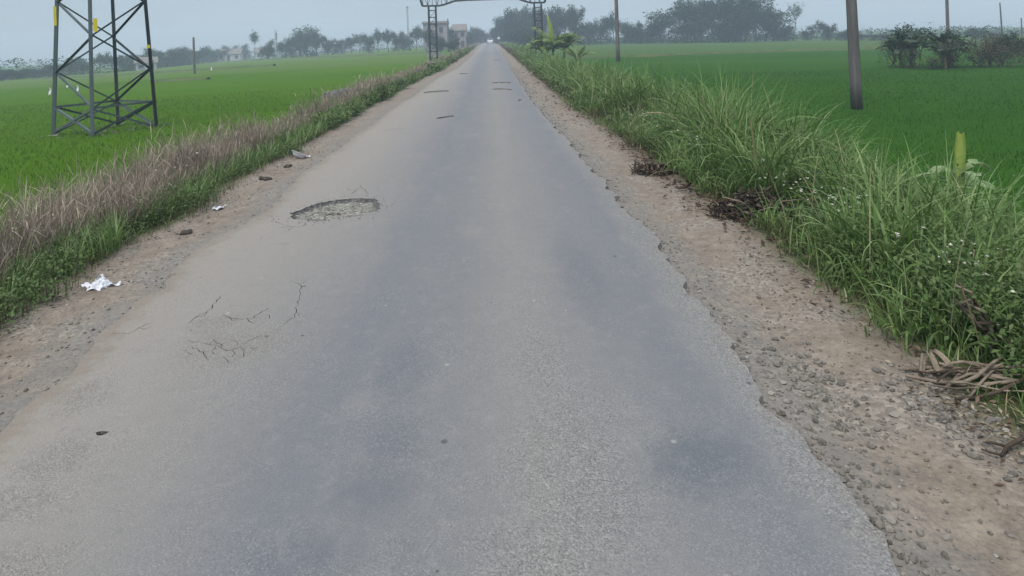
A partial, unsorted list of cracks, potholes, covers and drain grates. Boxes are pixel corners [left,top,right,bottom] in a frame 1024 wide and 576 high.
crack [184,298,270,361]
pothole [273,195,393,226]
